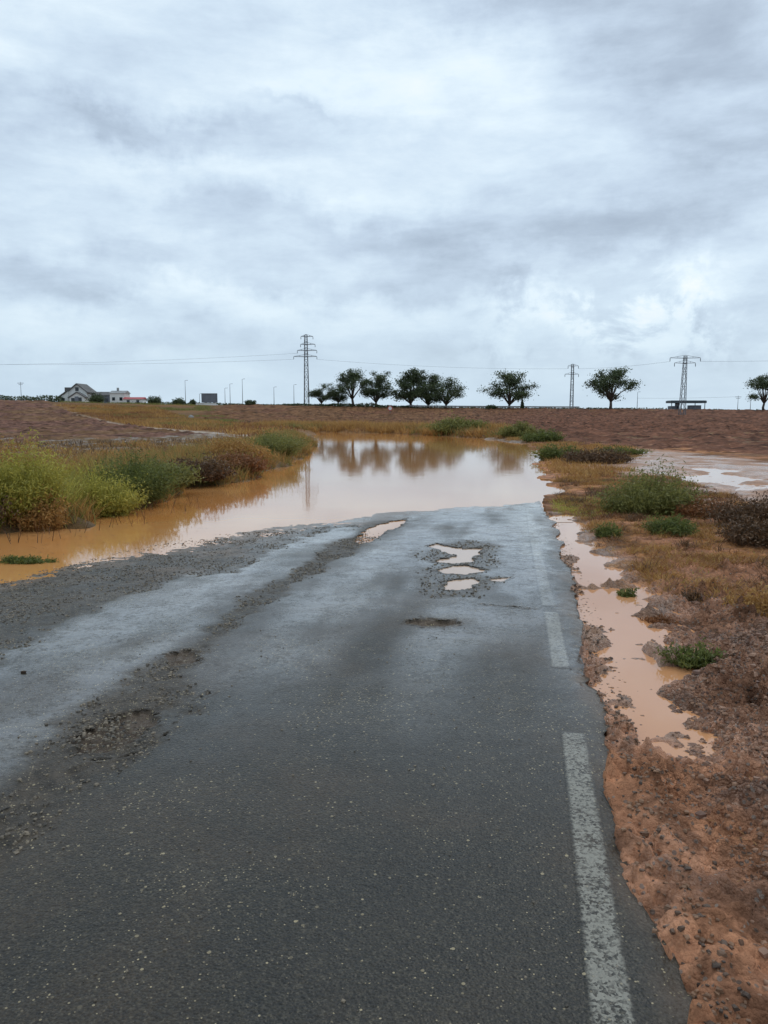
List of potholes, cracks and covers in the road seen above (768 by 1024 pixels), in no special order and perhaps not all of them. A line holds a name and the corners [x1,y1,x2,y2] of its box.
pothole [423,543,487,564]
pothole [54,707,170,756]
pothole [350,517,411,546]
pothole [156,647,210,668]
pothole [432,563,491,576]
pothole [437,577,485,591]
pothole [399,615,468,628]
